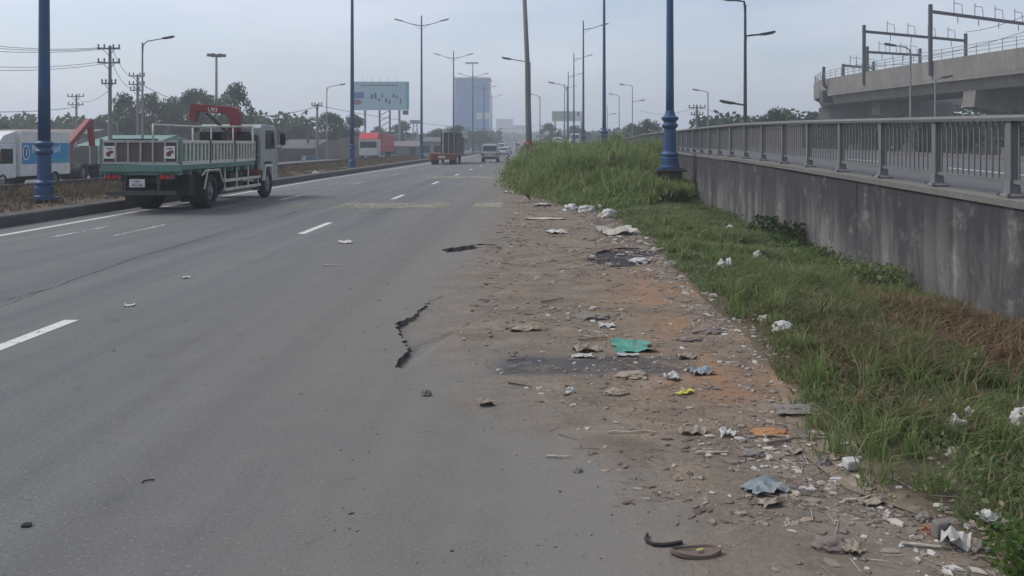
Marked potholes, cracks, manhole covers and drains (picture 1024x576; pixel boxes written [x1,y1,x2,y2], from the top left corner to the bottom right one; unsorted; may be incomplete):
pothole [442,244,502,258]
pothole [588,247,655,267]
